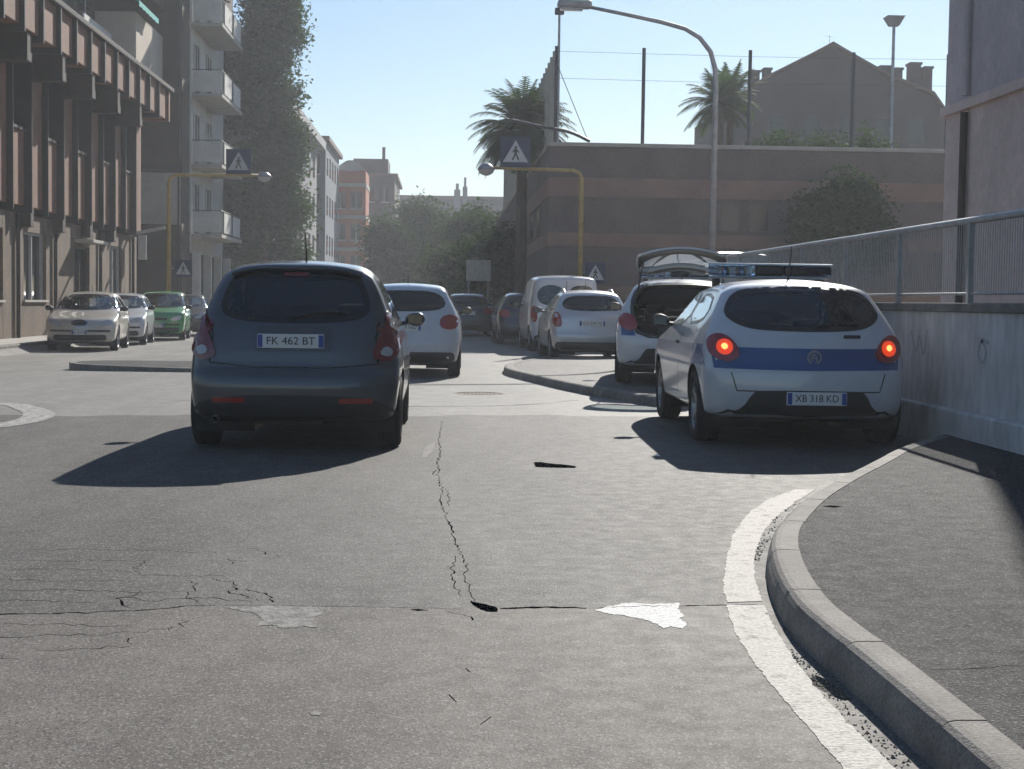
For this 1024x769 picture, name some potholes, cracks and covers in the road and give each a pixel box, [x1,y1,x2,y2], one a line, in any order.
crack [3,548,279,607]
pothole [470,601,498,612]
crack [432,421,475,621]
